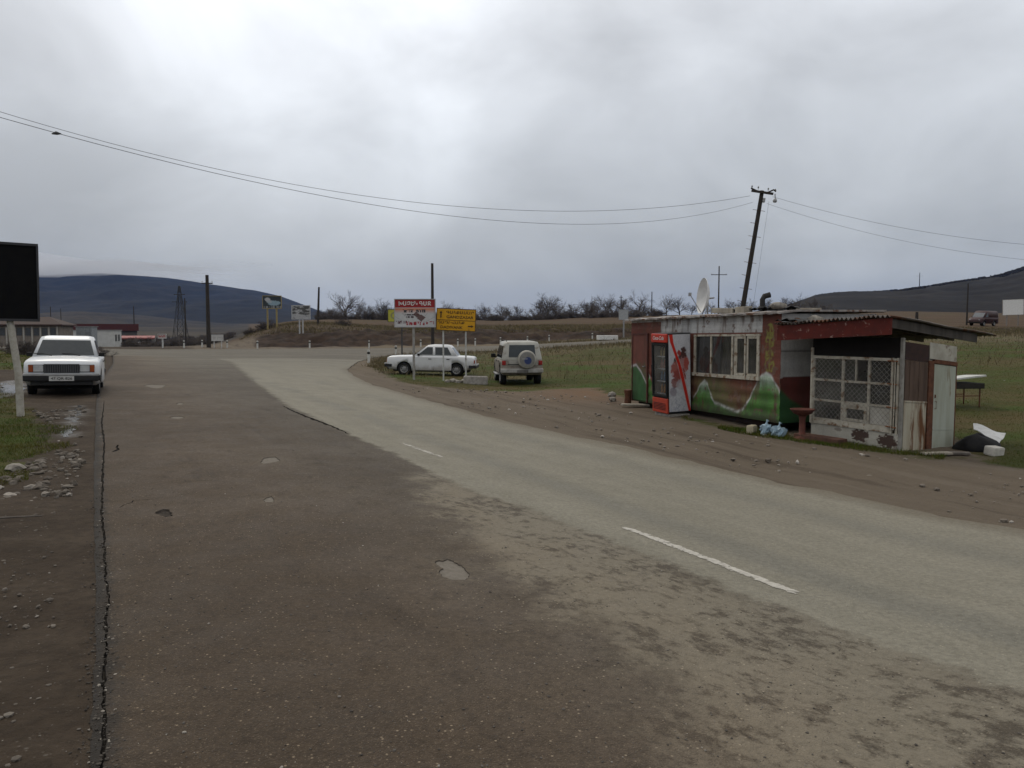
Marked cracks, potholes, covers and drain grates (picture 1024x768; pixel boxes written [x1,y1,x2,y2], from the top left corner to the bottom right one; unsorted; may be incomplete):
pothole [435,559,470,580]
crack [99,404,150,768]
